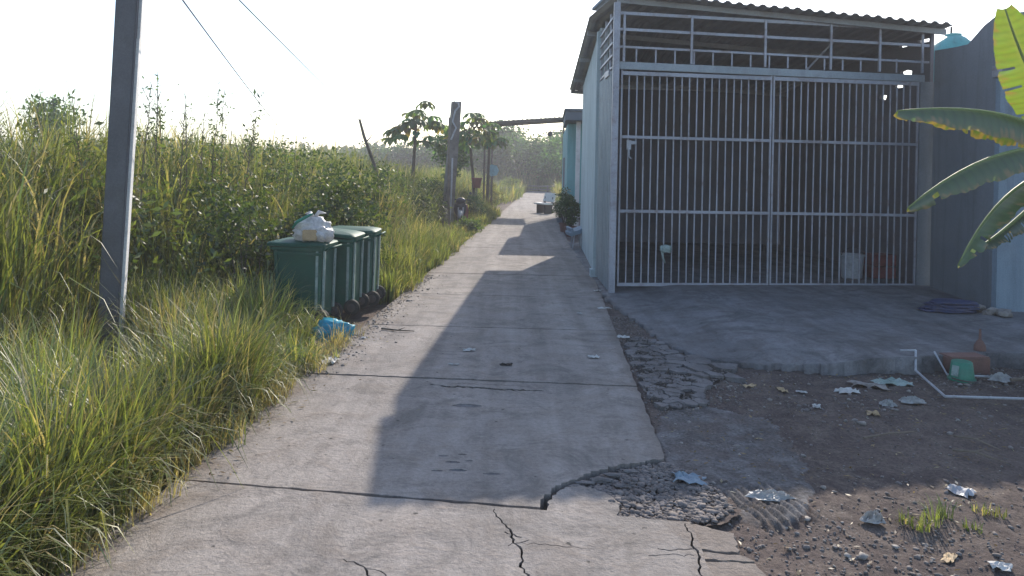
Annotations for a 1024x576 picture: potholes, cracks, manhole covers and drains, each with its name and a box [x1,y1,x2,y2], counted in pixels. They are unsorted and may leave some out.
crack [496,516,525,573]
crack [686,529,701,574]
crack [624,337,746,411]
pothole [551,462,742,526]
